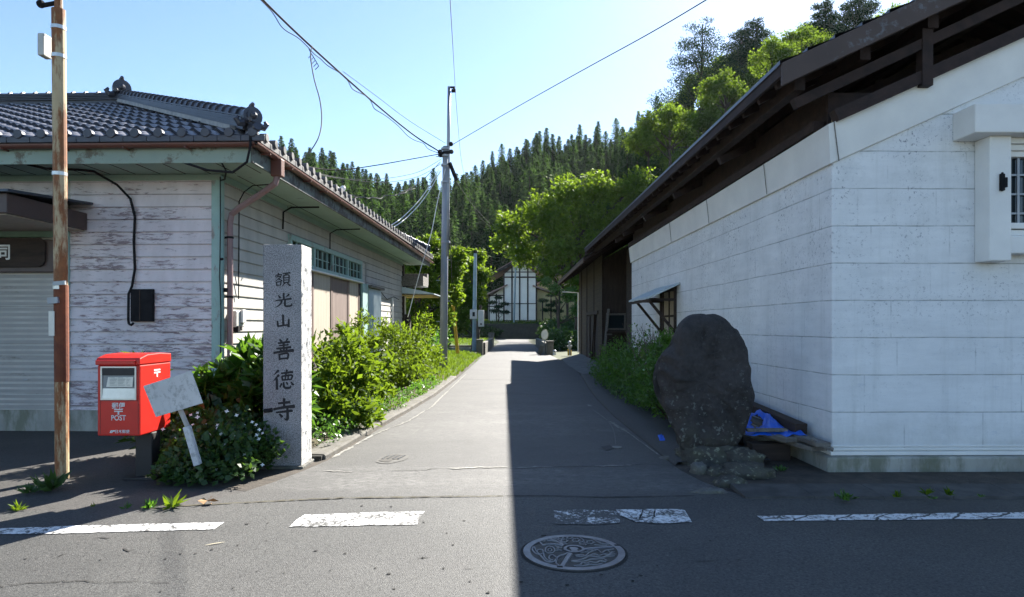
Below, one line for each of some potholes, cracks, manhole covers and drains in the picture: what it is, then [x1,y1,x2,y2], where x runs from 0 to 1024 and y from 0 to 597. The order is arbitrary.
manhole cover [520,535,628,573]
manhole cover [376,454,409,464]
